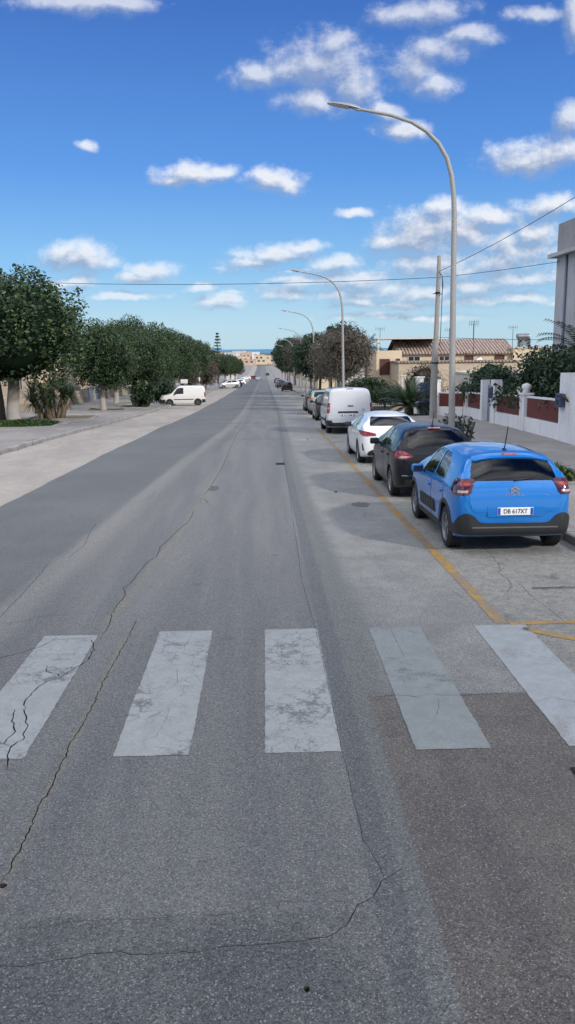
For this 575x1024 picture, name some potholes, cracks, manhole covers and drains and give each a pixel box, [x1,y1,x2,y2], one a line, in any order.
crack [2,869,400,967]
crack [1,434,237,884]
